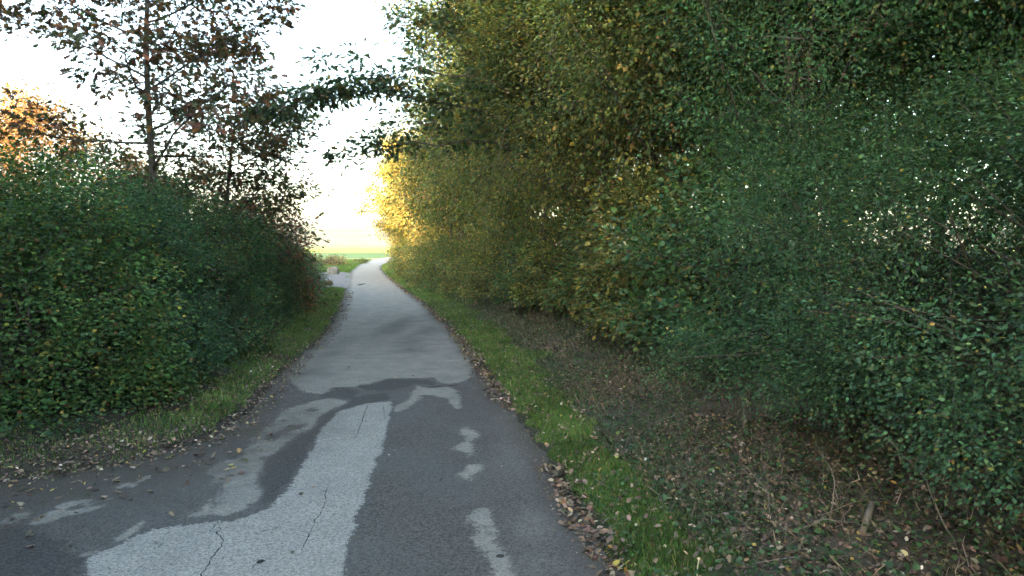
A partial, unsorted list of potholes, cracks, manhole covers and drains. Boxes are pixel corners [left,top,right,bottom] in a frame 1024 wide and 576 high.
crack [200,519,231,576]
